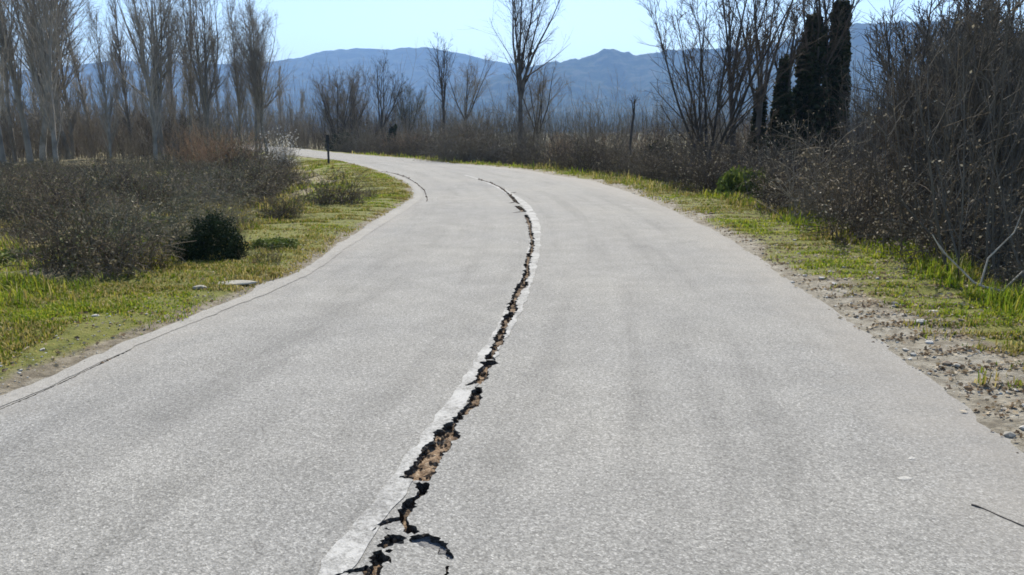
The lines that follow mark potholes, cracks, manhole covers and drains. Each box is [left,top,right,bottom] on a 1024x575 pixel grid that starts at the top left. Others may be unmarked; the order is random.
crack [338,178,535,575]
